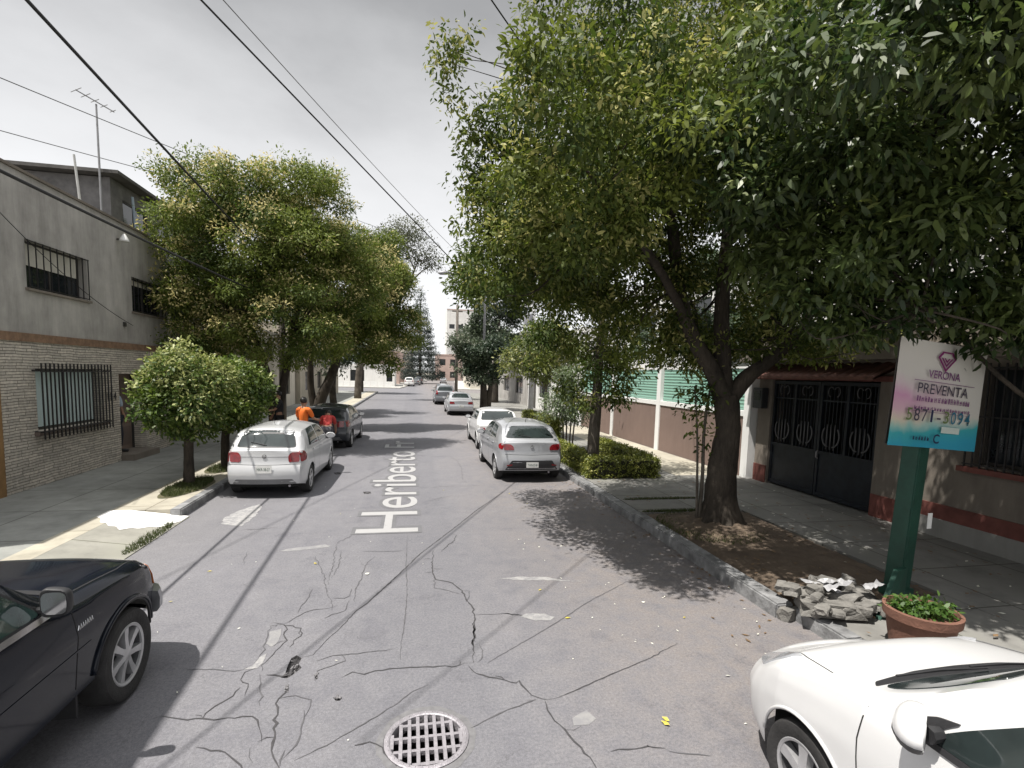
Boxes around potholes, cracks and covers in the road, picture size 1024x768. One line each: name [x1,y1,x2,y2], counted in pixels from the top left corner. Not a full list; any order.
pothole [281,655,301,678]
crack [150,494,710,768]
